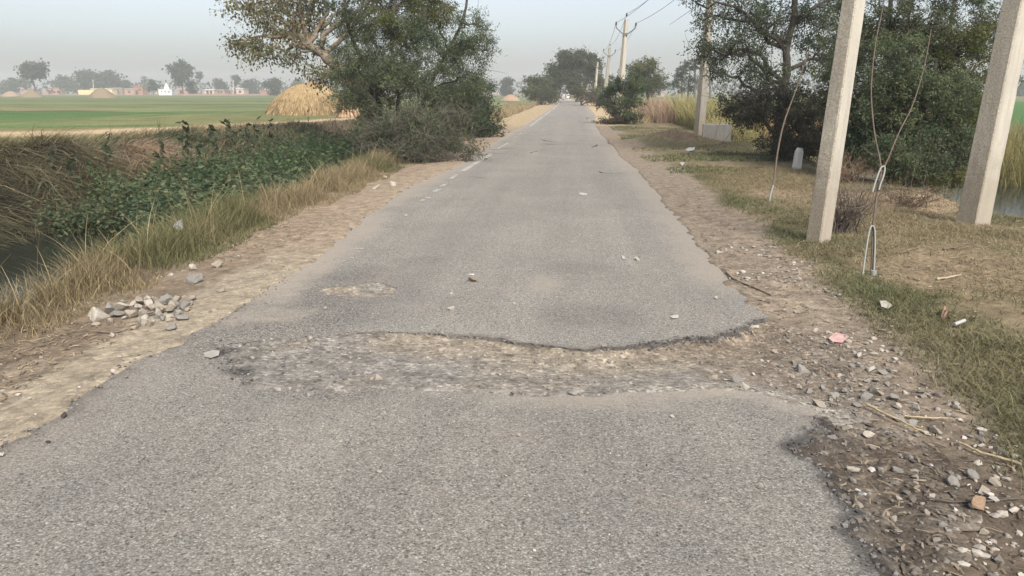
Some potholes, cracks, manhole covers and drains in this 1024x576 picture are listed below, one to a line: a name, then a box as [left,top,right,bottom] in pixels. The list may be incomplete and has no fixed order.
pothole [220,322,897,426]
